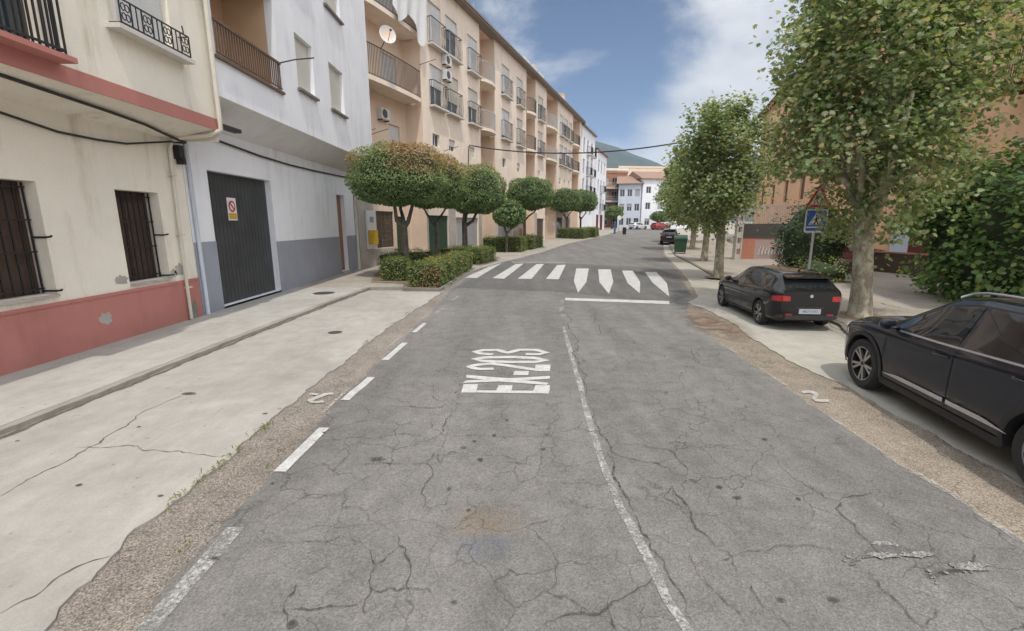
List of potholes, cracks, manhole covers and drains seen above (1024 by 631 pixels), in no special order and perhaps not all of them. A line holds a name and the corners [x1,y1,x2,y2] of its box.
pothole [925,560,991,584]
crack [508,306,843,629]
crack [308,367,561,510]
crack [268,494,431,623]
pothole [842,540,936,565]
crack [1,556,110,613]
crack [77,445,219,457]
crack [811,486,878,552]
crack [868,571,937,628]
crack [924,546,1022,574]
